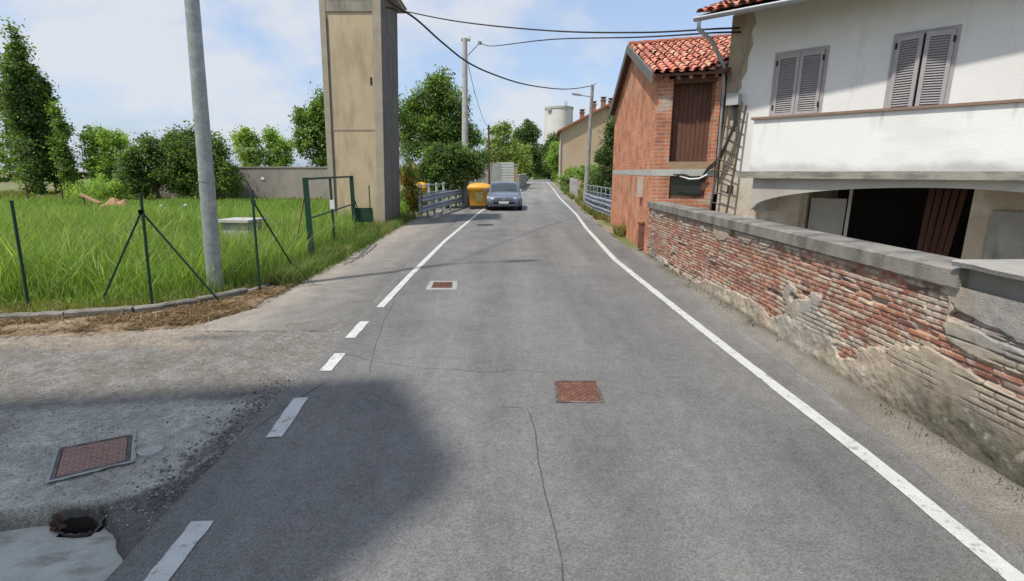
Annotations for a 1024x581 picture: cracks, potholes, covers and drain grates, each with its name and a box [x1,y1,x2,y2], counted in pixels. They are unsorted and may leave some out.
manhole cover [554,380,604,403]
manhole cover [45,433,136,483]
manhole cover [426,281,458,290]
pothole [49,509,106,538]
manhole cover [138,444,164,458]
crack [502,407,564,581]
